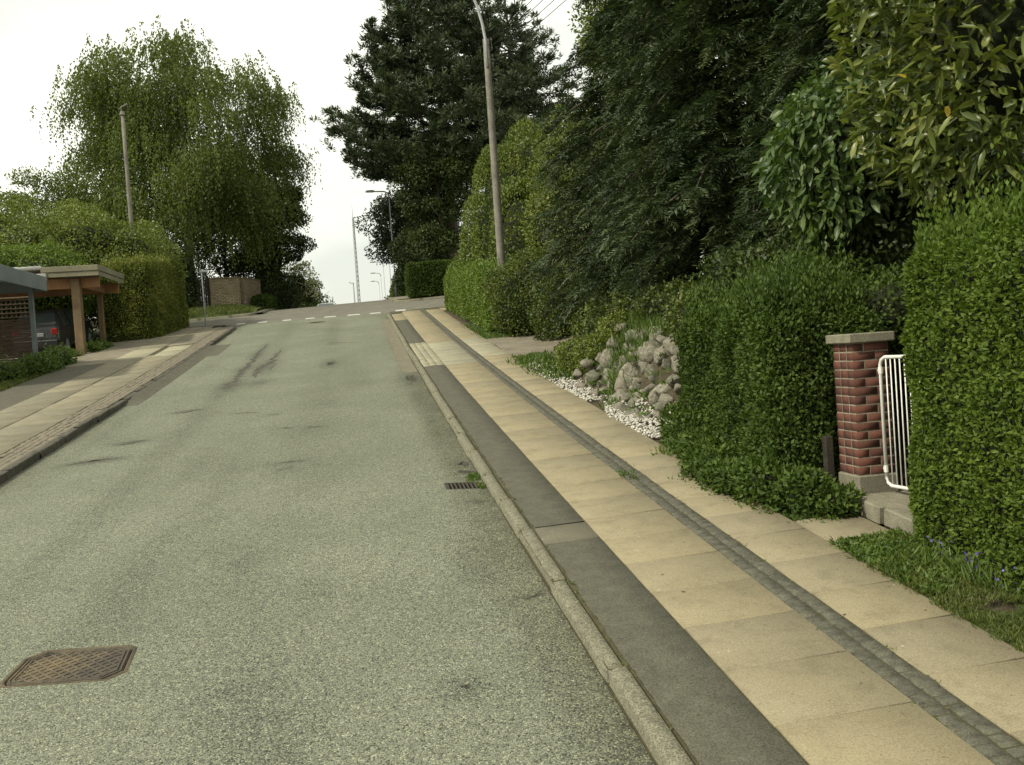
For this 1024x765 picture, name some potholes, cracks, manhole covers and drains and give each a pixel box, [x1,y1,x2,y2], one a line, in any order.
drain grate [444,482,486,490]
manhole cover [0,645,138,688]
